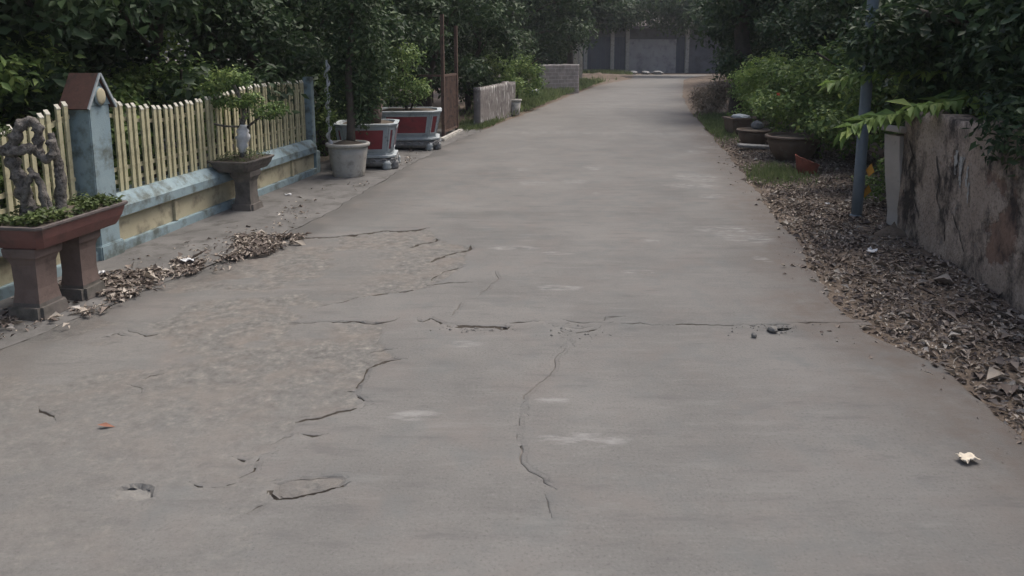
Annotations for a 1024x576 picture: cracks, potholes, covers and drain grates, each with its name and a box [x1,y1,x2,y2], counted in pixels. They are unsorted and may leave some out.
crack [95,327,164,339]
crack [123,371,169,394]
crack [184,227,872,518]
pothole [104,477,167,507]
